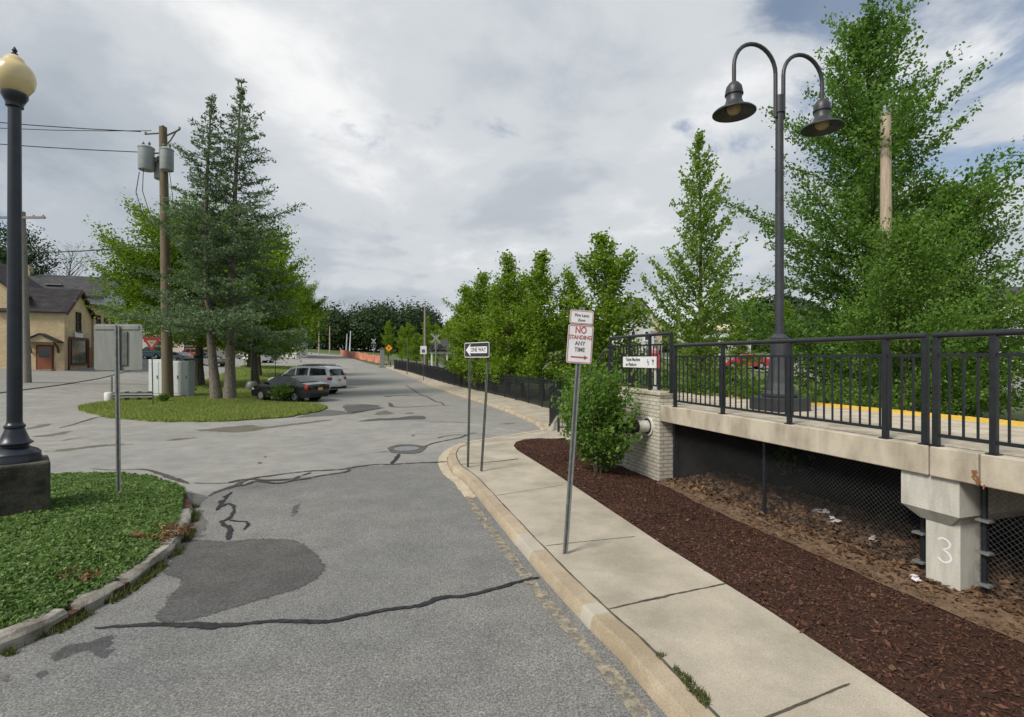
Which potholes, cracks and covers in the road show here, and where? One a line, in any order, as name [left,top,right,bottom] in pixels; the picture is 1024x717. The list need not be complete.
manhole cover [388,444,426,454]
crack [208,422,476,529]
